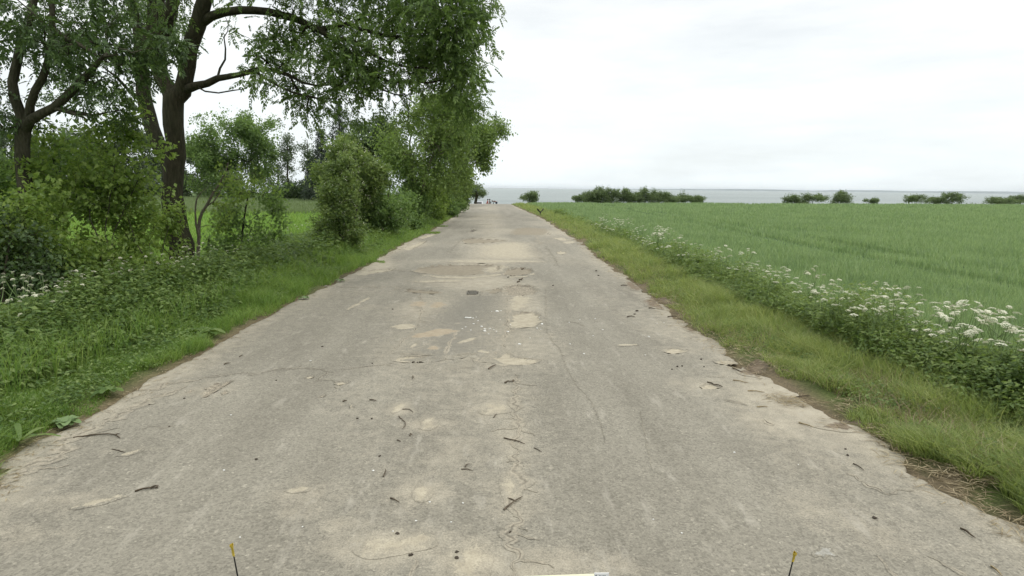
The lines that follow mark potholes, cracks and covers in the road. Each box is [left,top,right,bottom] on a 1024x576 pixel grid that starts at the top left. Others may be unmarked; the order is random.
crack [0,332,478,487]
crack [560,350,605,442]
crack [847,473,914,495]
